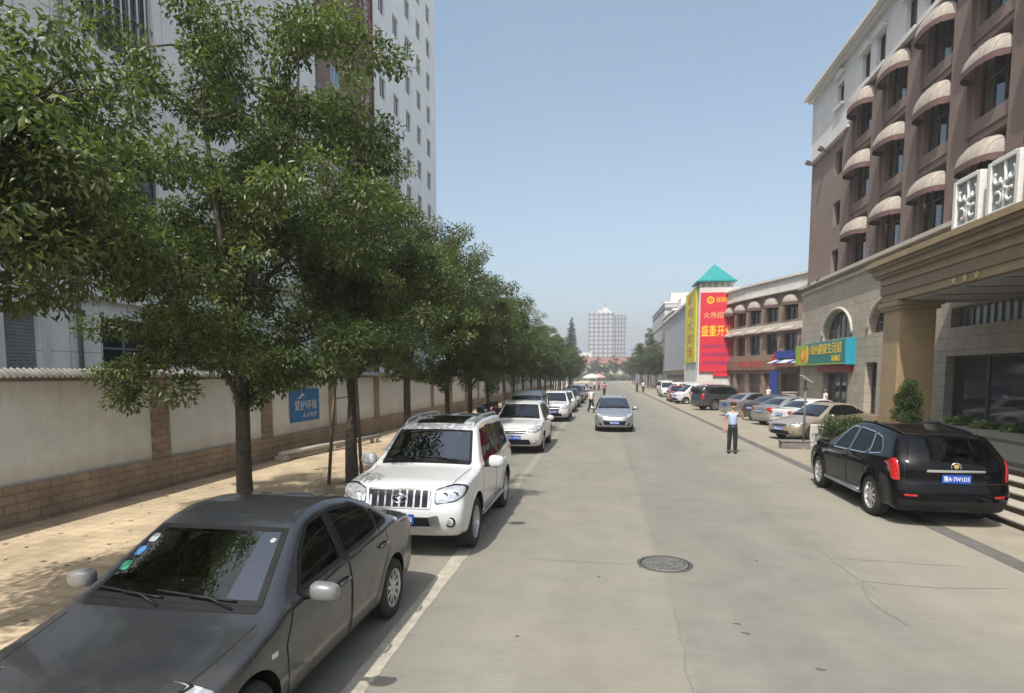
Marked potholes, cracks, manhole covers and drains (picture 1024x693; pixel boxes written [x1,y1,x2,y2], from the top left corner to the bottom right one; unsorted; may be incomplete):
crack [673,610,694,693]
crack [817,546,1012,626]
manhole cover [637,555,693,573]
